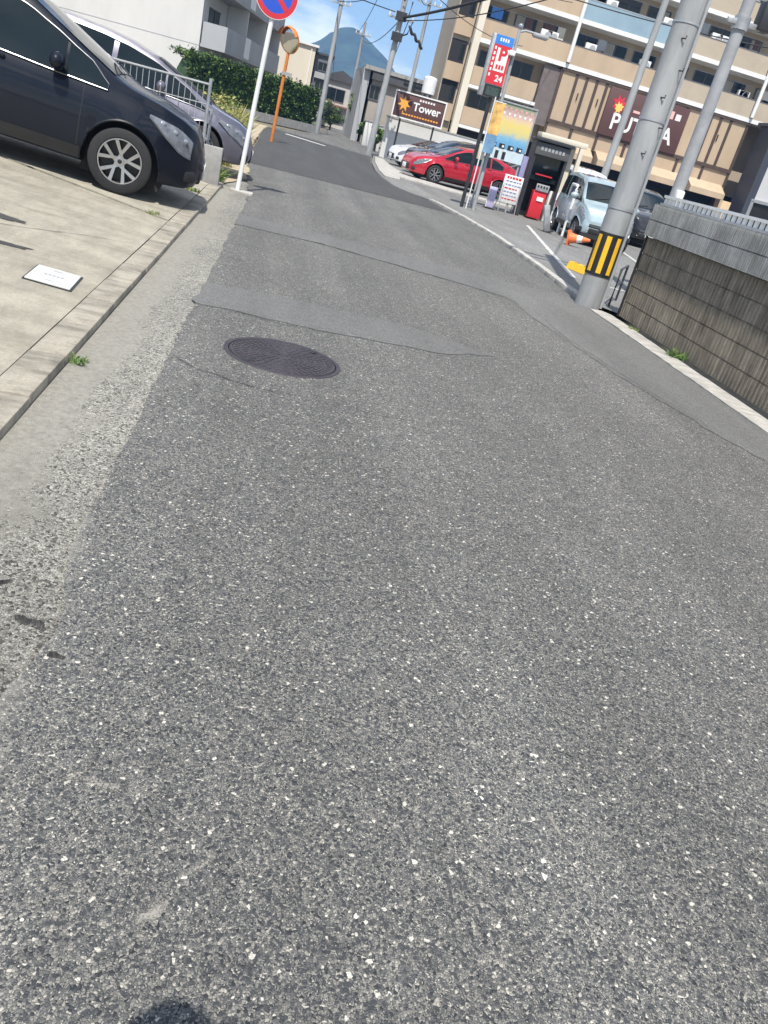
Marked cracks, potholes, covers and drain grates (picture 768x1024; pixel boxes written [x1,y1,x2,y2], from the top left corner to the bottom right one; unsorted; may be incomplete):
pothole [46,651,66,660]
pothole [14,614,47,631]
manhole cover [223,337,340,379]
